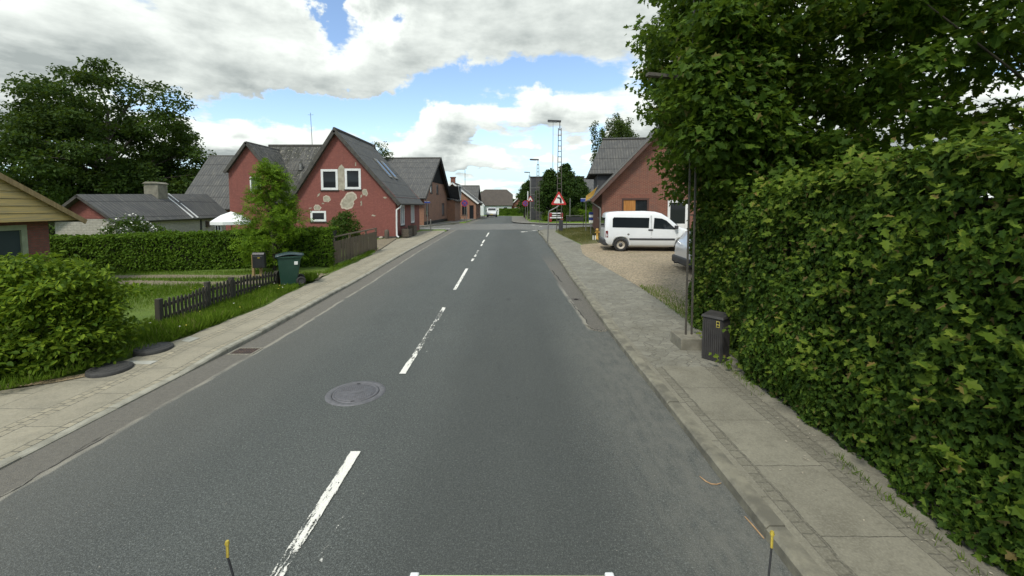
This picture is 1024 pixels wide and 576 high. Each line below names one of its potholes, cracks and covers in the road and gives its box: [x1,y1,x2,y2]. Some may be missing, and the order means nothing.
manhole cover [325,381,386,406]
